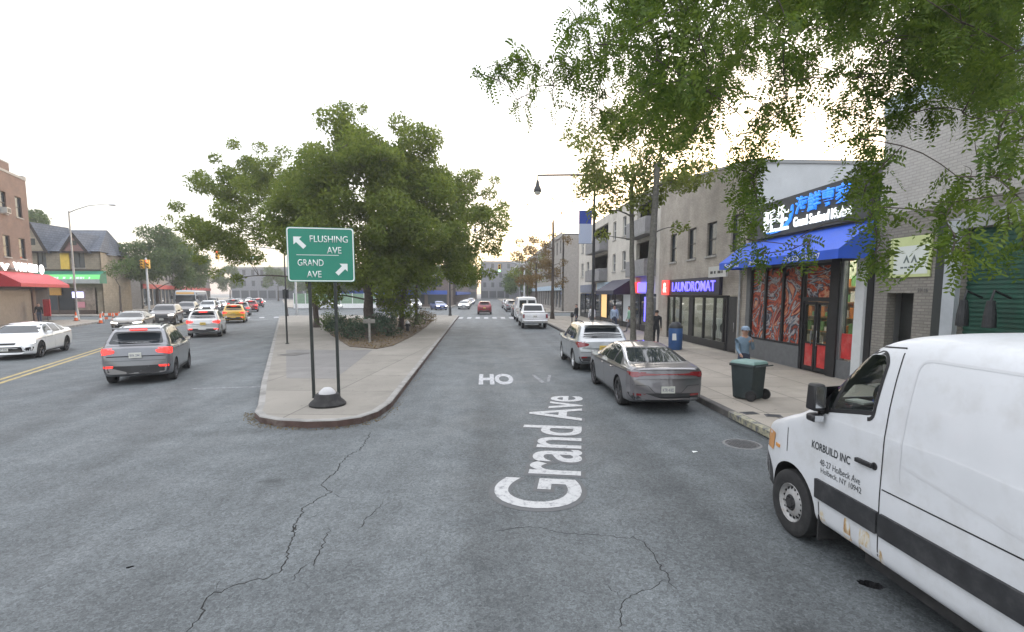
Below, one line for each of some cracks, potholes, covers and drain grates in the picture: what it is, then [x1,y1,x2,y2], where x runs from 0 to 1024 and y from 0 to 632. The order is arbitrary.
crack [497,527,679,632]
manhole cover [722,439,762,450]
crack [186,431,372,632]
pothole [856,579,886,590]
